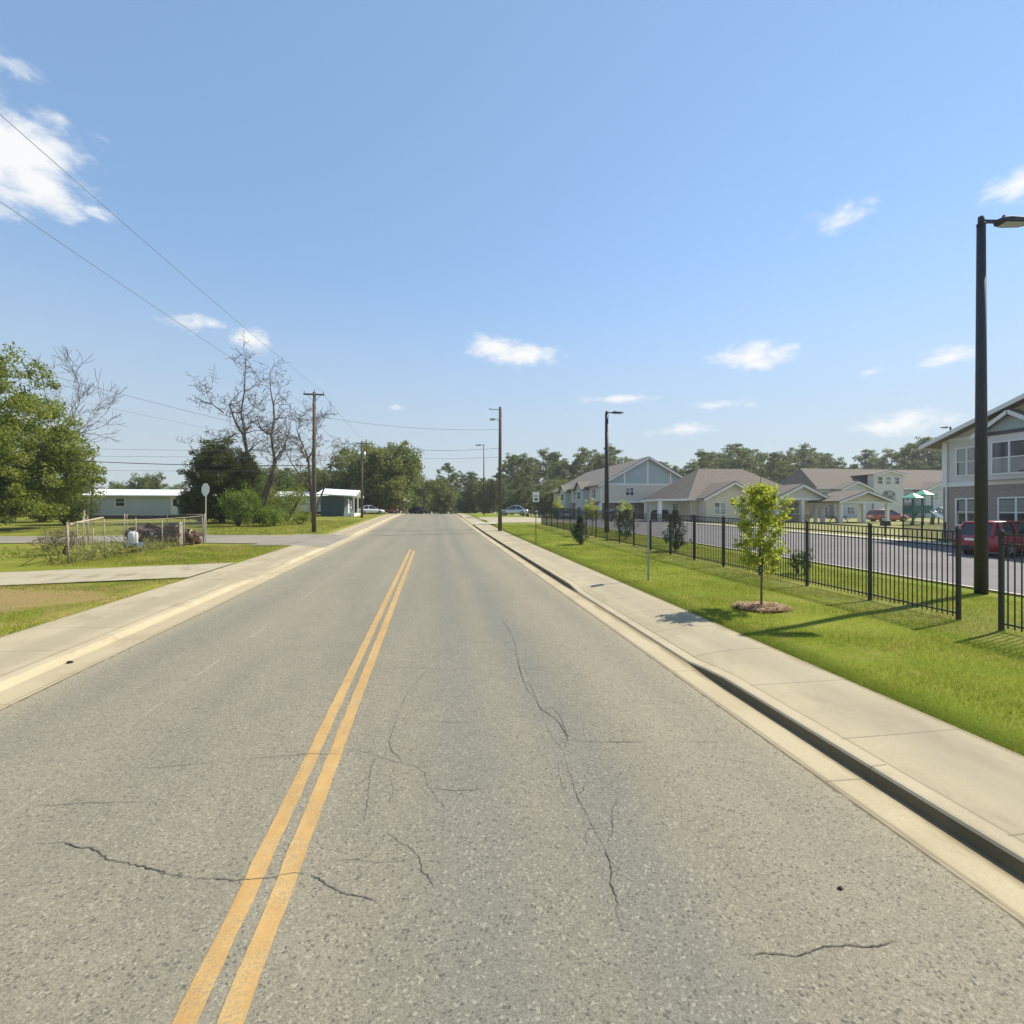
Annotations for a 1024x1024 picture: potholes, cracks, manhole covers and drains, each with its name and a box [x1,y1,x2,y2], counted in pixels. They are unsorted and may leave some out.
crack [749,940,896,956]
crack [502,619,710,926]
crack [145,667,485,817]
crack [28,833,434,901]
